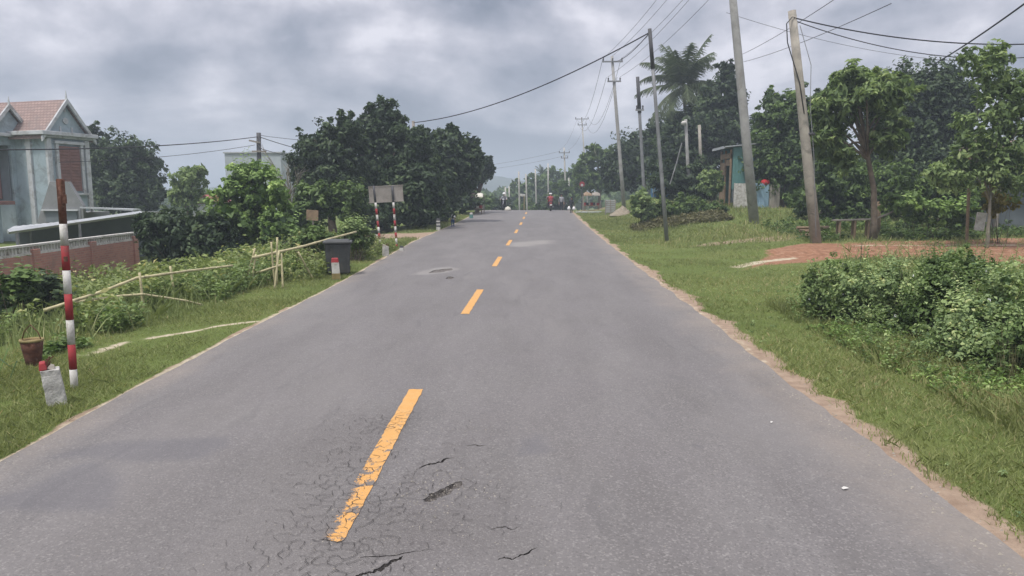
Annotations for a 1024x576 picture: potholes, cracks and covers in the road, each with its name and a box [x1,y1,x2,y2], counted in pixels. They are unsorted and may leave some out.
crack [101,408,562,576]
pothole [423,481,462,502]
